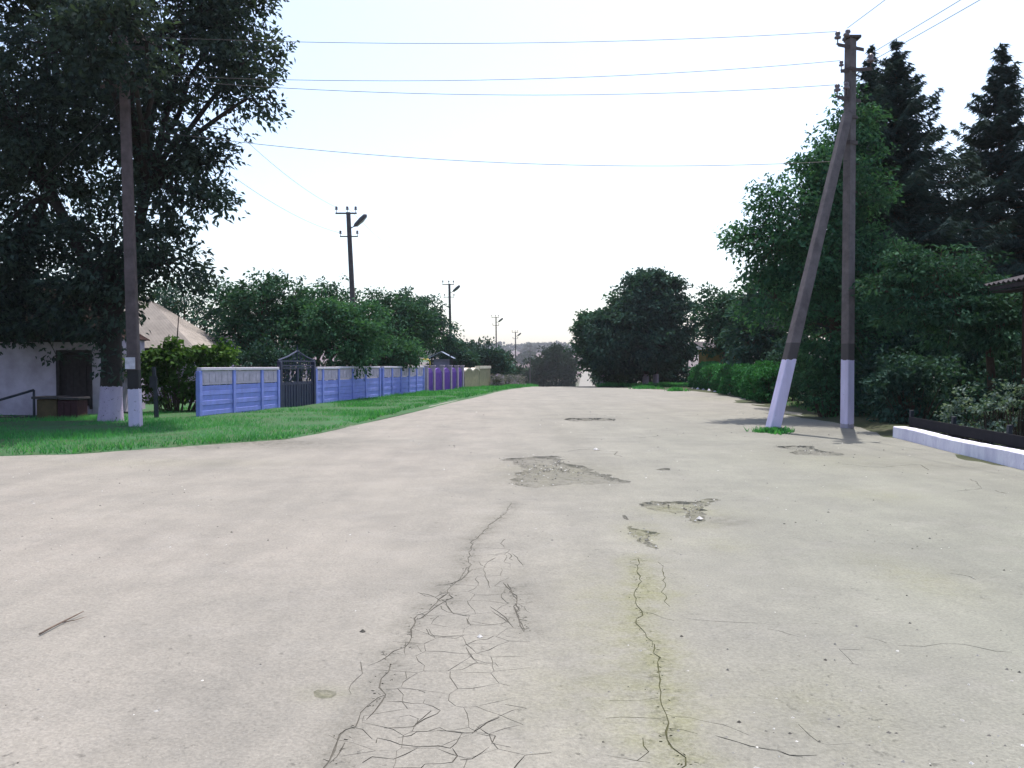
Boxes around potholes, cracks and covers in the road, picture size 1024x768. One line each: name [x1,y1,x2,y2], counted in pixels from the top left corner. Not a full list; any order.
crack [839,637,1004,665]
pothole [502,456,631,488]
crack [609,559,711,768]
pothole [640,498,718,524]
crack [715,723,849,757]
pothole [627,526,660,549]
pothole [777,446,844,456]
crack [323,504,551,768]
